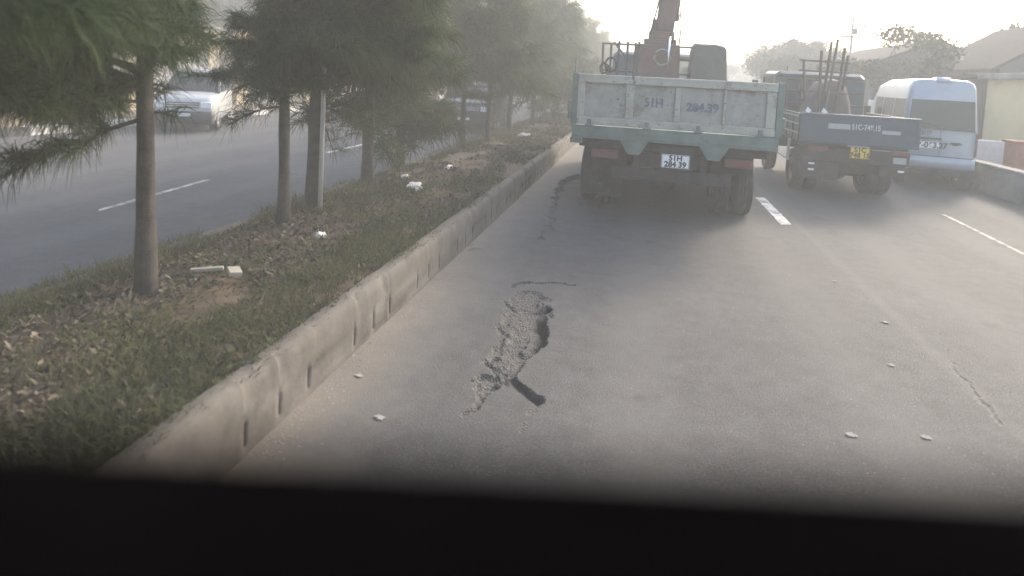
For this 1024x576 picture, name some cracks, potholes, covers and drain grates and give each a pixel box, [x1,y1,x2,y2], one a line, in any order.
crack [948,361,1004,427]
pothole [471,290,555,434]
crack [534,205,558,241]
